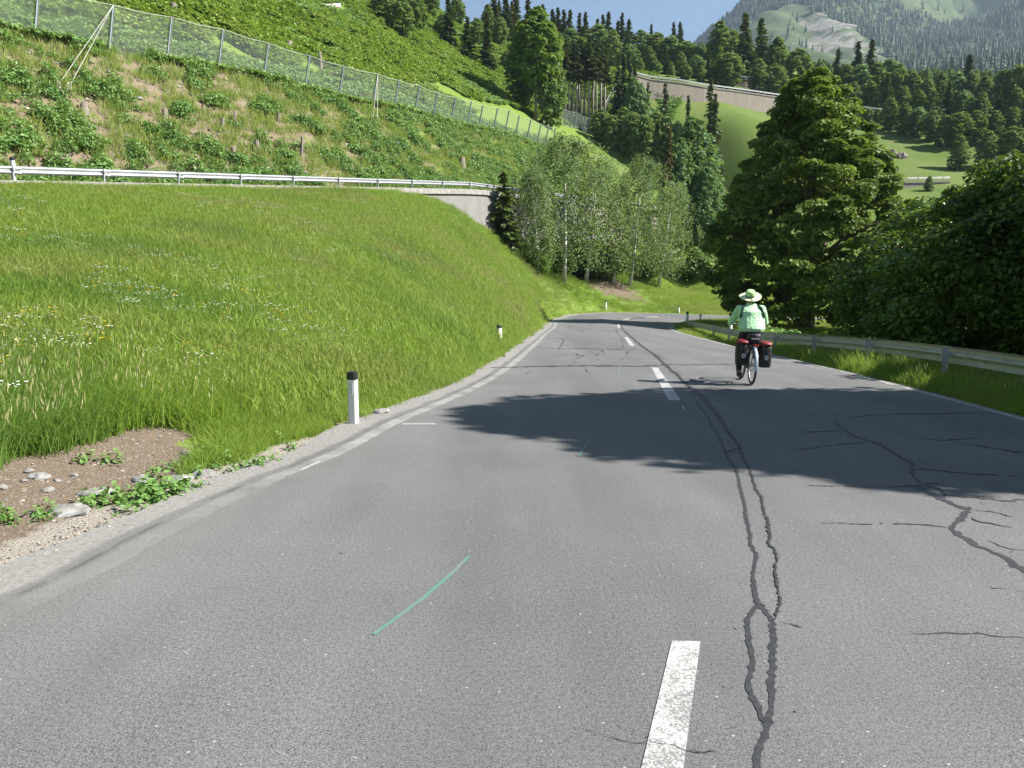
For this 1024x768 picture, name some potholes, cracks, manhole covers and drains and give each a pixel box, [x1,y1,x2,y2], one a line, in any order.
crack [558,317,1024,768]
